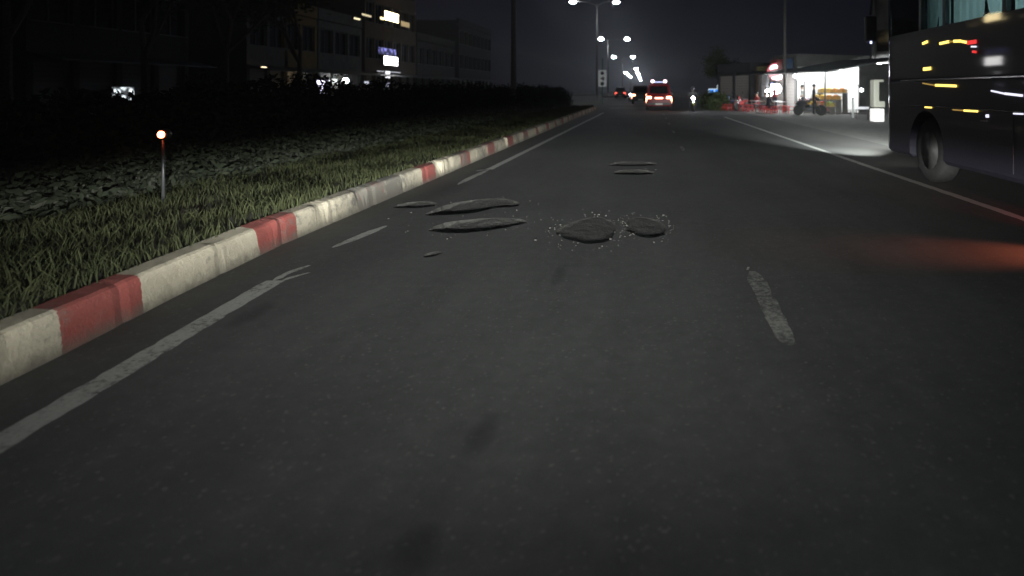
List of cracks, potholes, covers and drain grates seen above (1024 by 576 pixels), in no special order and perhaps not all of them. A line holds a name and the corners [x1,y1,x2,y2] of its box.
pothole [429,218,528,233]
pothole [556,217,617,244]
pothole [624,217,667,238]
pothole [425,198,520,216]
